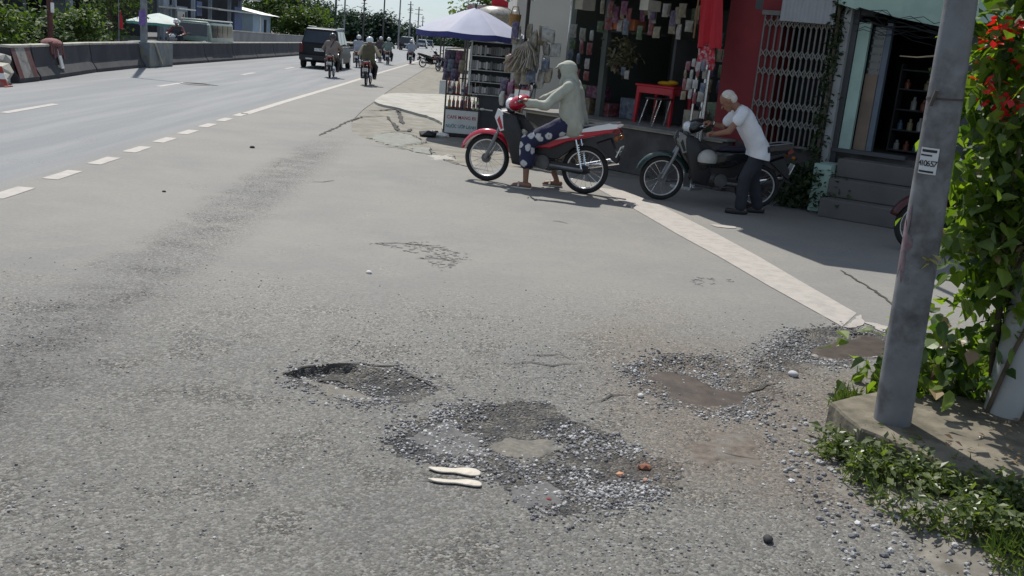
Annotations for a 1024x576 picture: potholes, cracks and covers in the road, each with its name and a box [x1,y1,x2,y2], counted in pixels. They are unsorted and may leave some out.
crack [506,353,581,366]
pothole [323,387,756,552]
pothole [268,358,467,414]
pothole [728,321,887,389]
pothole [607,347,809,432]
crack [841,270,892,304]
crack [319,109,455,158]
